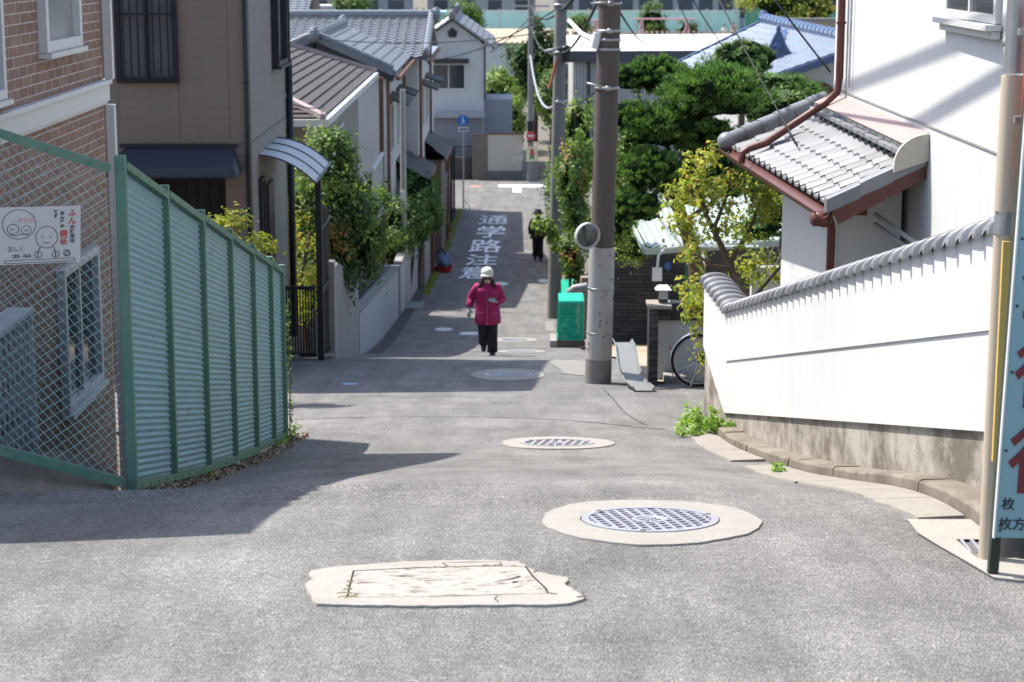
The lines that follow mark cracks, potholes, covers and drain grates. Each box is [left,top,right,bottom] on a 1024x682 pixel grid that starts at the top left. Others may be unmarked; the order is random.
manhole cover [542,500,762,547]
manhole cover [470,368,544,381]
manhole cover [502,436,615,450]
crack [288,387,658,429]
